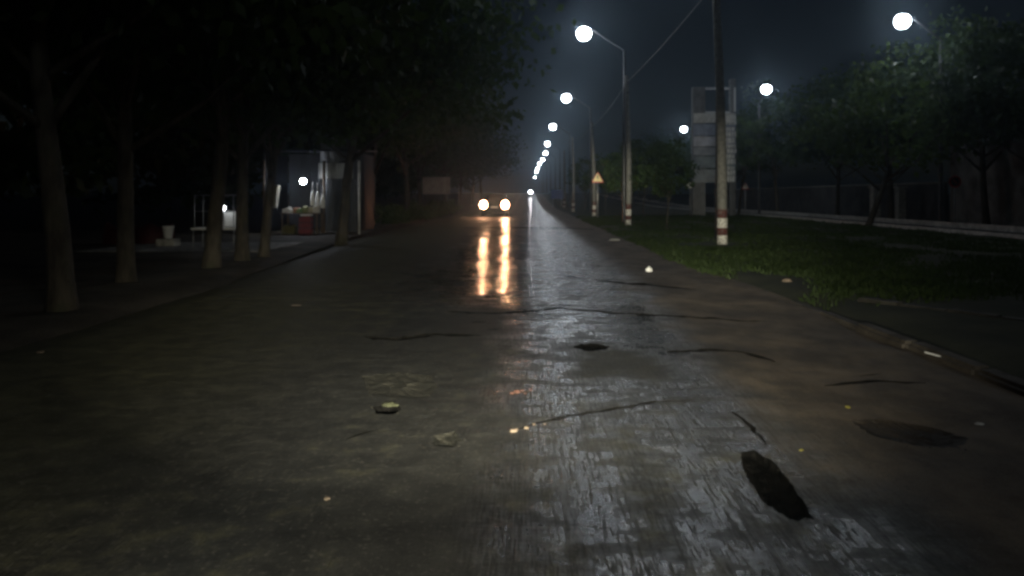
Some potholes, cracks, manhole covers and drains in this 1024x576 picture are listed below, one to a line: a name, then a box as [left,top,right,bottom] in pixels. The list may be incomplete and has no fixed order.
crack [365,328,503,341]
crack [667,348,776,362]
crack [518,399,767,445]
pothole [740,450,819,521]
crack [561,275,691,289]
crack [825,374,924,386]
pothole [574,343,611,351]
pothole [851,419,968,450]
